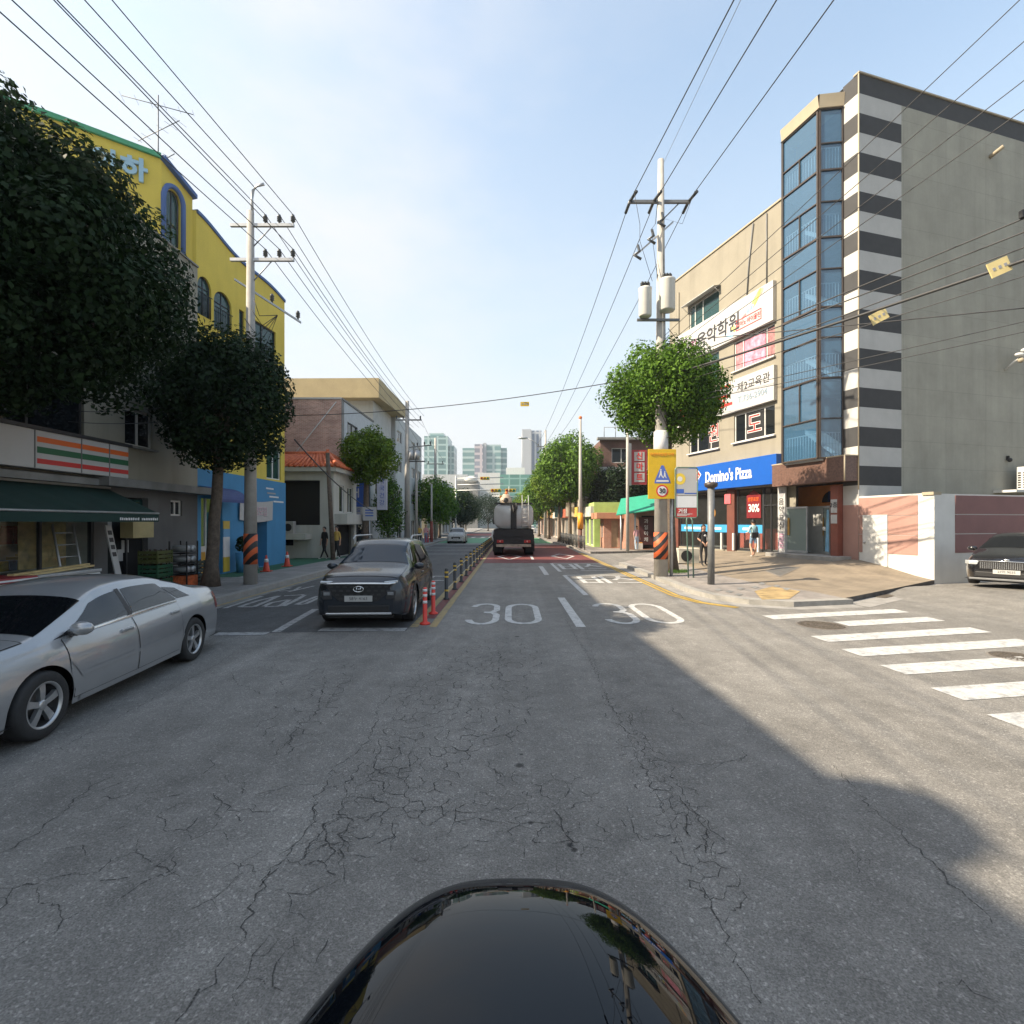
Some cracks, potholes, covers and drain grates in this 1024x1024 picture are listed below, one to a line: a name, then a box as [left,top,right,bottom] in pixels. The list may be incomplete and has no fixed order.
crack [175,641,761,1021]
manhole cover [986,651,1024,662]
manhole cover [796,621,848,630]
crack [0,760,278,934]
crack [845,842,998,1002]
